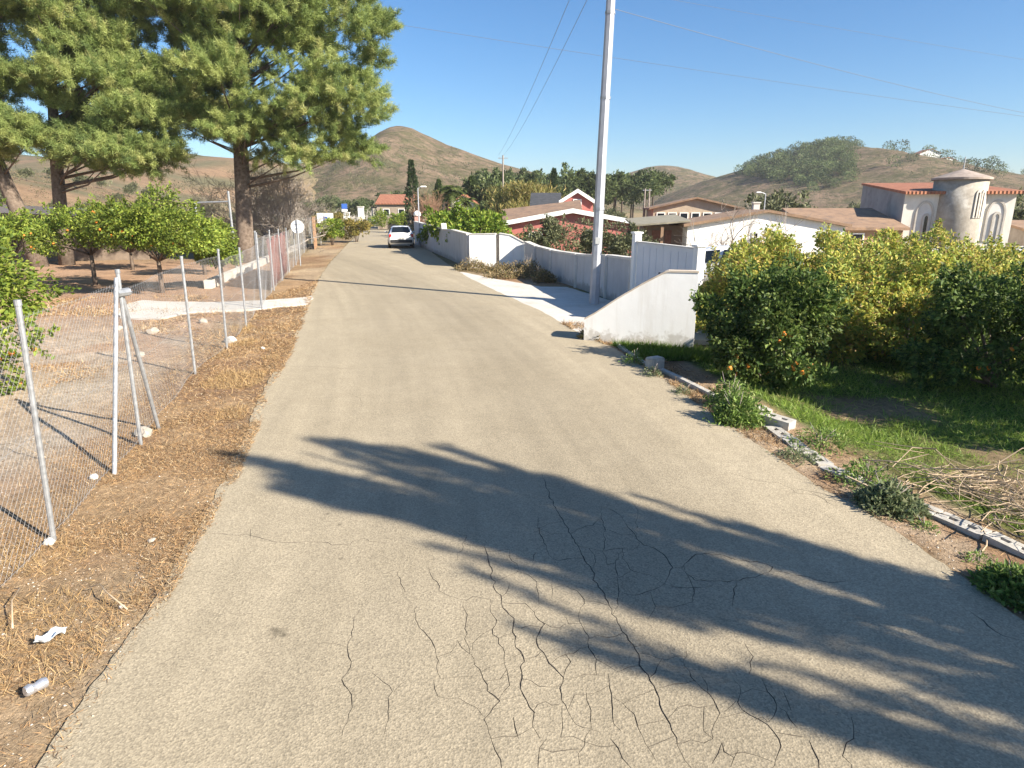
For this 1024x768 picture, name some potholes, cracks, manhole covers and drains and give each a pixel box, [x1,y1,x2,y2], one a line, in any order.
crack [203,530,392,545]
crack [332,609,360,734]
crack [414,475,843,768]
crack [842,717,854,768]
